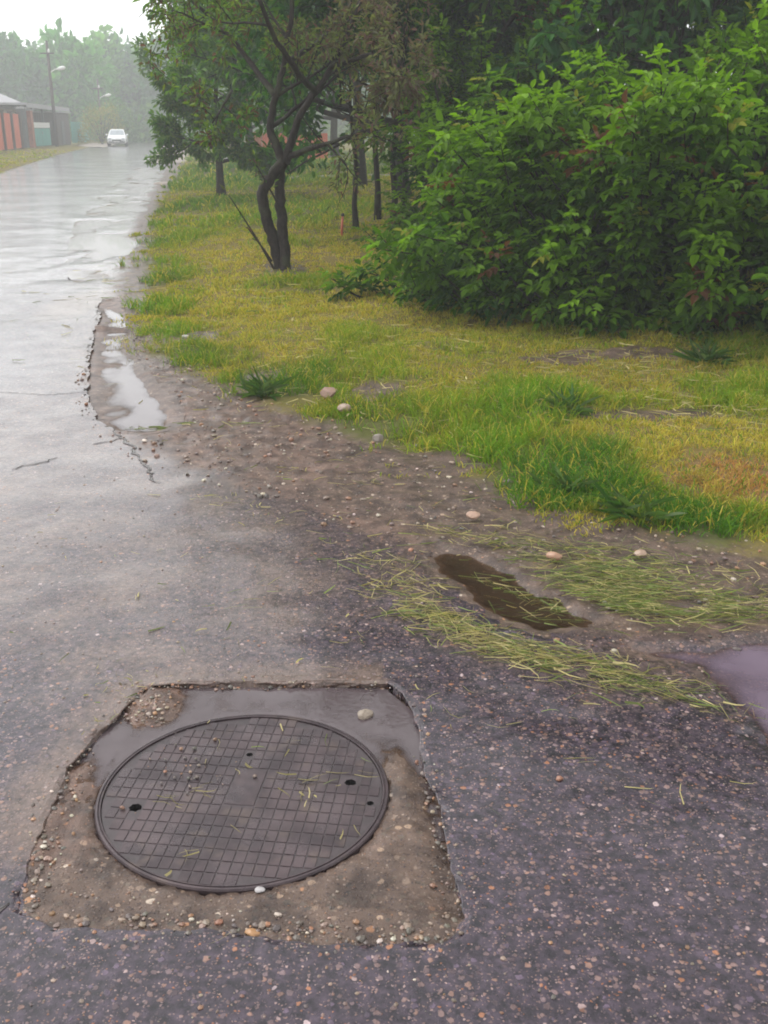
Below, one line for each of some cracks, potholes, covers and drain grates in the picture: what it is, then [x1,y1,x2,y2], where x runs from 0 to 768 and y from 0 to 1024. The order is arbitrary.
crack [94,430,161,483]
manhole cover [94,714,389,896]
pothole [407,536,634,648]
pothole [0,674,487,961]
